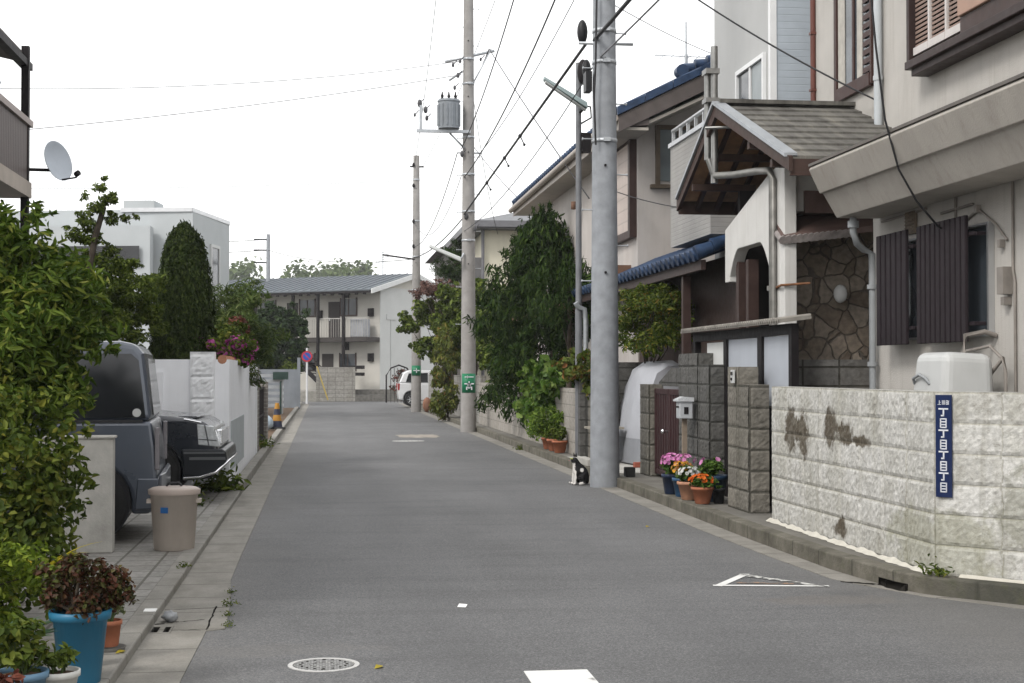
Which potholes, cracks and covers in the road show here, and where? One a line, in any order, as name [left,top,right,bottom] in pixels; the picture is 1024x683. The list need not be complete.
manhole cover [288,658,360,672]
crack [155,606,224,631]
